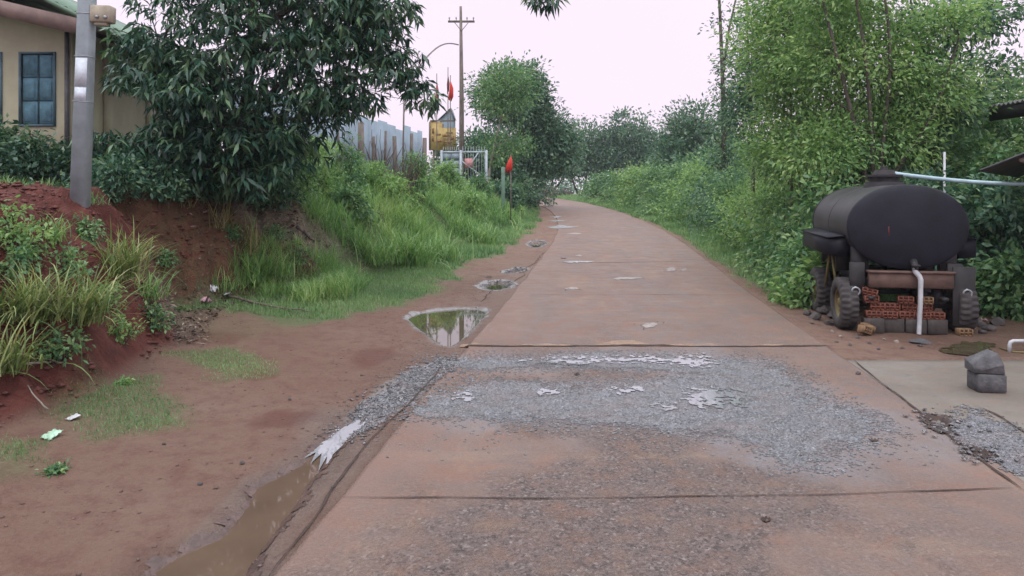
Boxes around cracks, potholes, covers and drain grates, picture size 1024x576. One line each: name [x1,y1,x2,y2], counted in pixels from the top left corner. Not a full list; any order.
pothole [472,279,519,291]
pothole [500,266,530,274]
pothole [953,441,1020,464]
pothole [403,307,490,347]
pothole [525,240,549,248]
